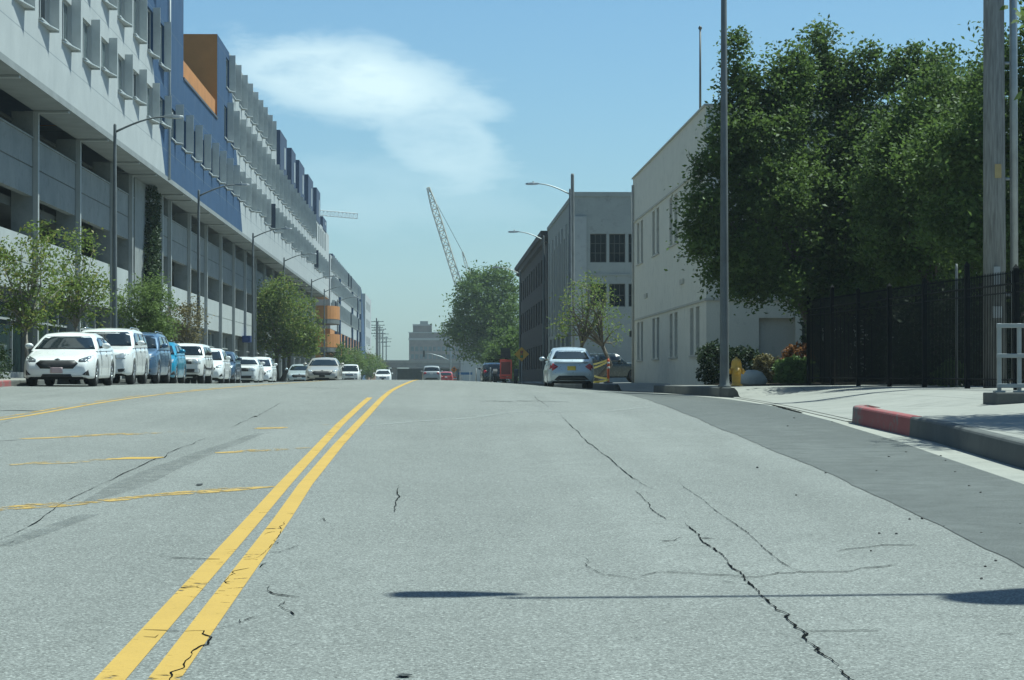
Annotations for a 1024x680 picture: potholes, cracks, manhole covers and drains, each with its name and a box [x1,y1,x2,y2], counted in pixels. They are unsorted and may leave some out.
crack [1,439,202,539]
crack [585,483,893,680]
crack [146,616,255,680]
crack [571,425,666,519]
